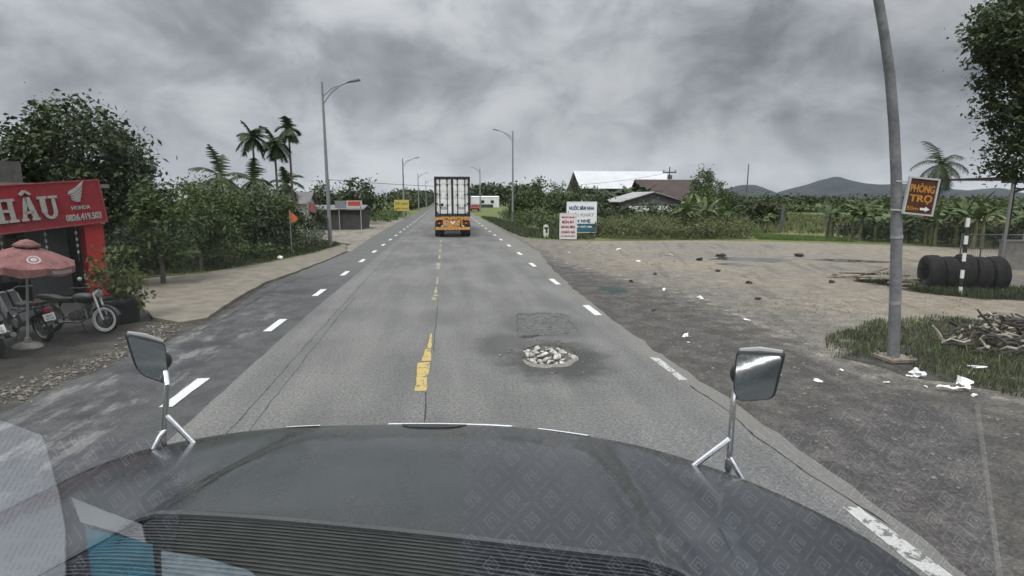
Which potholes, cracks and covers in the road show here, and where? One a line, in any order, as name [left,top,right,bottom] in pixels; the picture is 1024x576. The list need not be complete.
pothole [498,339,591,374]
crack [424,299,439,422]
